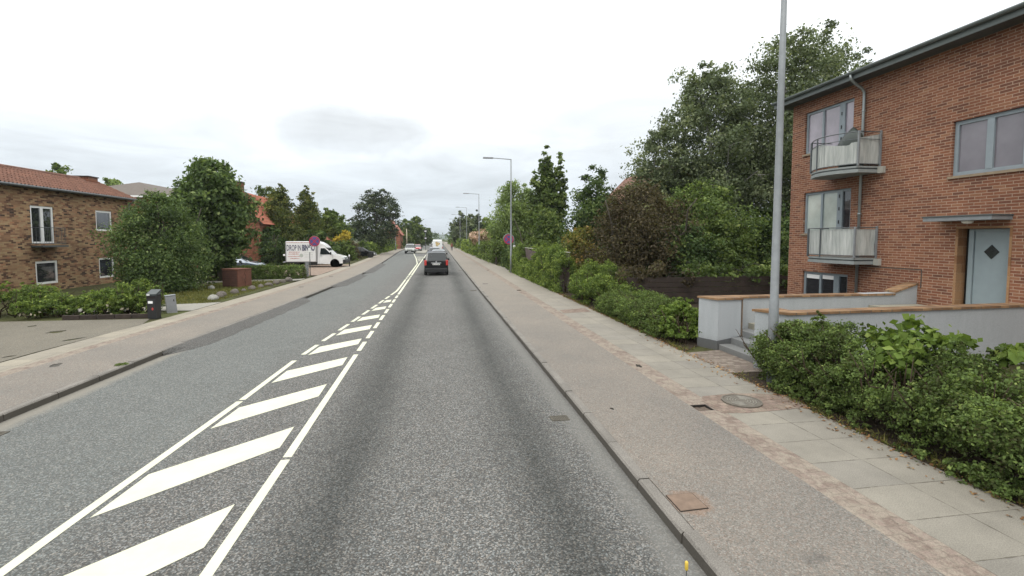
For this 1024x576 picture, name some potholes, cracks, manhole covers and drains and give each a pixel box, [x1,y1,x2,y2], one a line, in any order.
manhole cover [721,394,763,408]
manhole cover [666,493,709,512]
